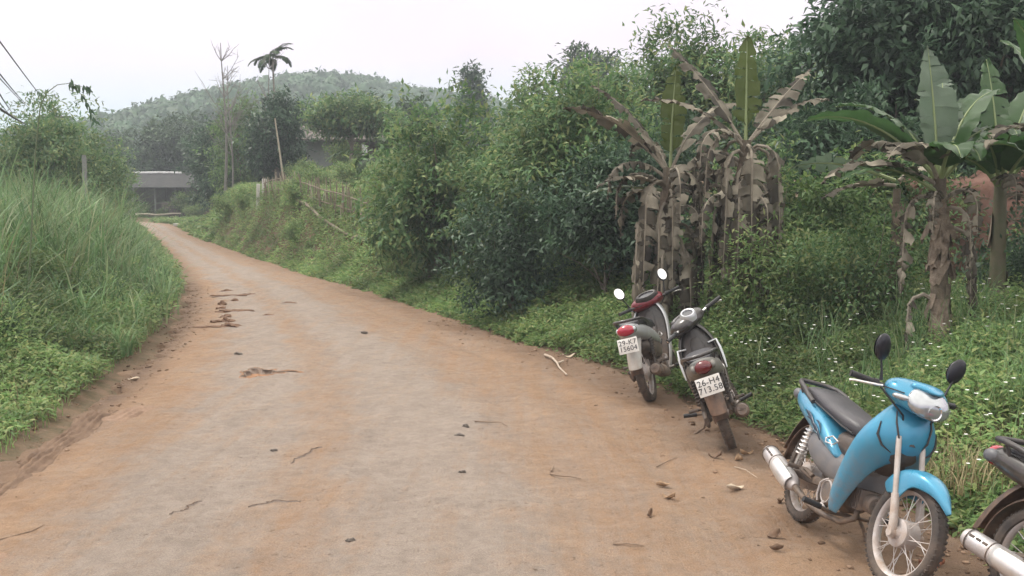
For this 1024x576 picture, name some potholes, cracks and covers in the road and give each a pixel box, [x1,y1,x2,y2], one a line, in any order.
pothole [239,367,303,378]
crack [291,446,322,464]
crack [169,501,202,515]
